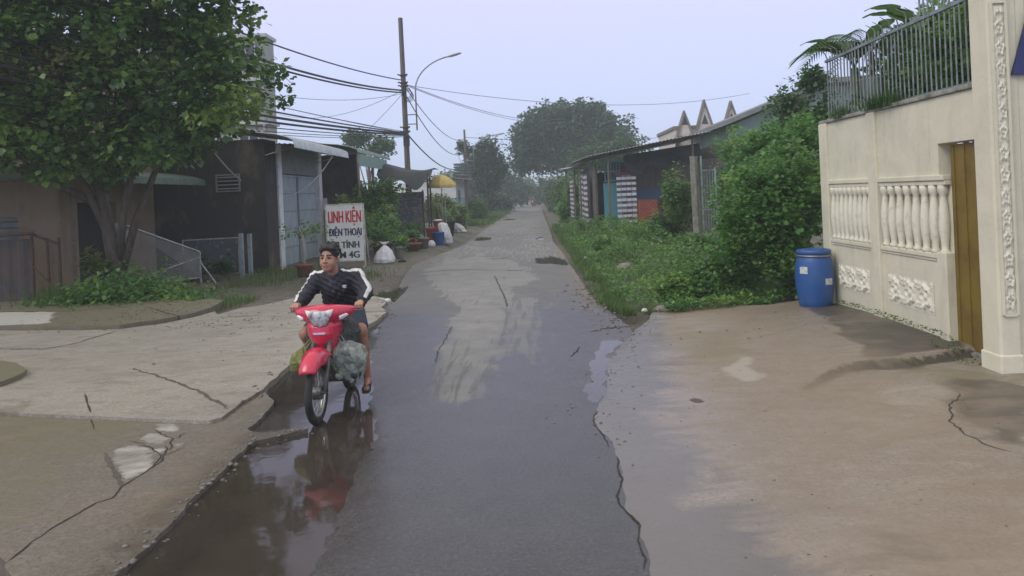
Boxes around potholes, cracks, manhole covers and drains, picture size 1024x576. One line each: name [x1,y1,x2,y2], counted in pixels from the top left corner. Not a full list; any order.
crack [3,430,184,565]
crack [948,394,1011,452]
crack [593,411,647,569]
pothole [534,256,569,266]
crack [430,258,519,306]
